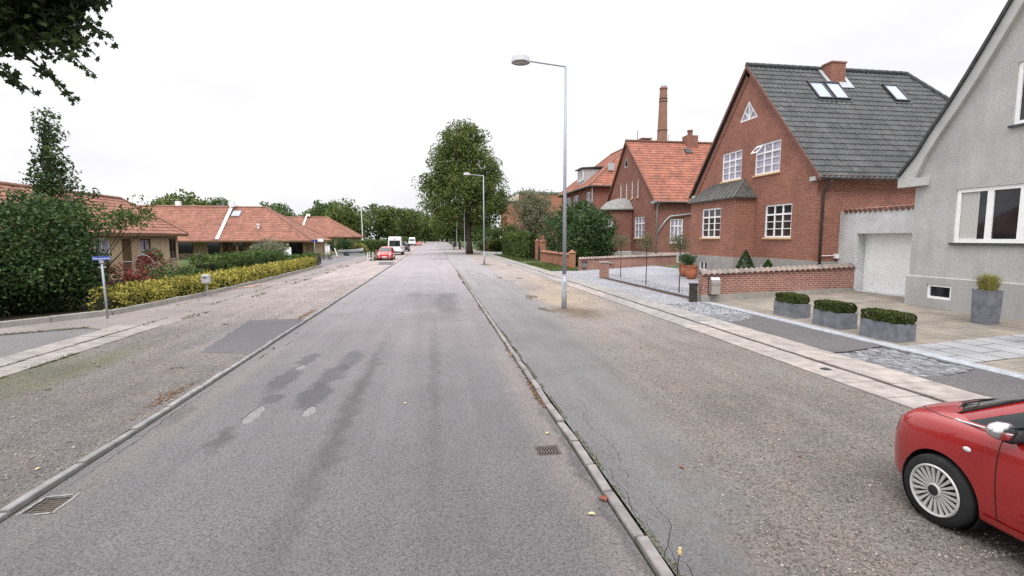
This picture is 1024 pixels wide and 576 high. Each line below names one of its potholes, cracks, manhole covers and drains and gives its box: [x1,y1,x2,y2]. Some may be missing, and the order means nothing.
crack [587,422,692,575]
drain grate [534,445,562,456]
